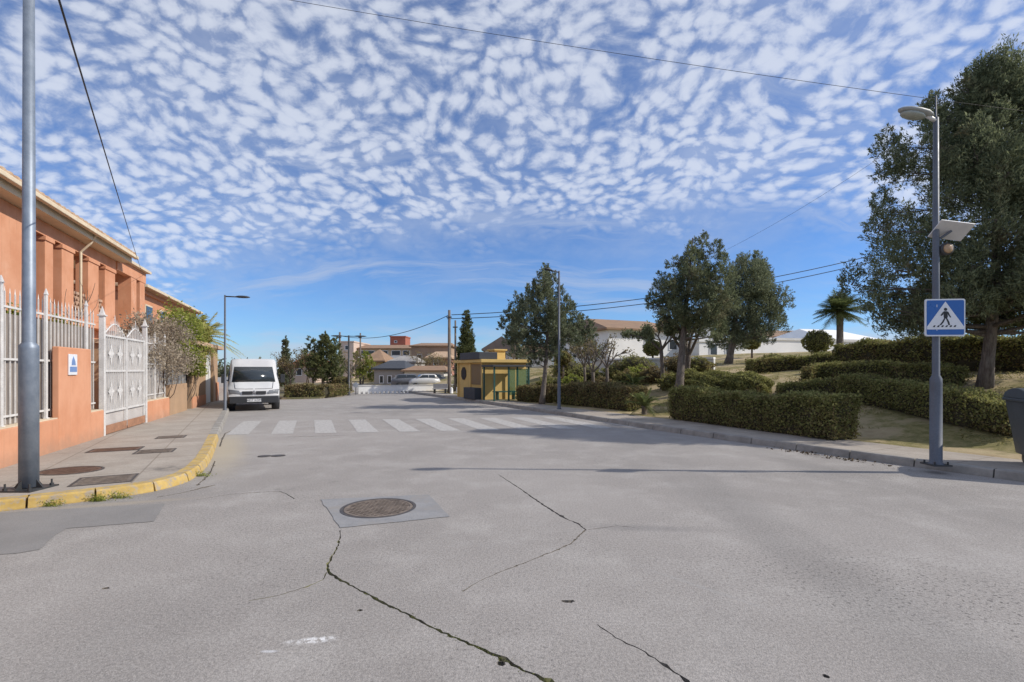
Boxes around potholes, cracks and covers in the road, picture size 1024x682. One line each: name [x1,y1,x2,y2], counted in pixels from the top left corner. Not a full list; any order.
manhole cover [67,473,139,487]
manhole cover [321,495,450,528]
manhole cover [40,466,105,475]
crack [249,477,627,682]
crack [598,625,690,682]
